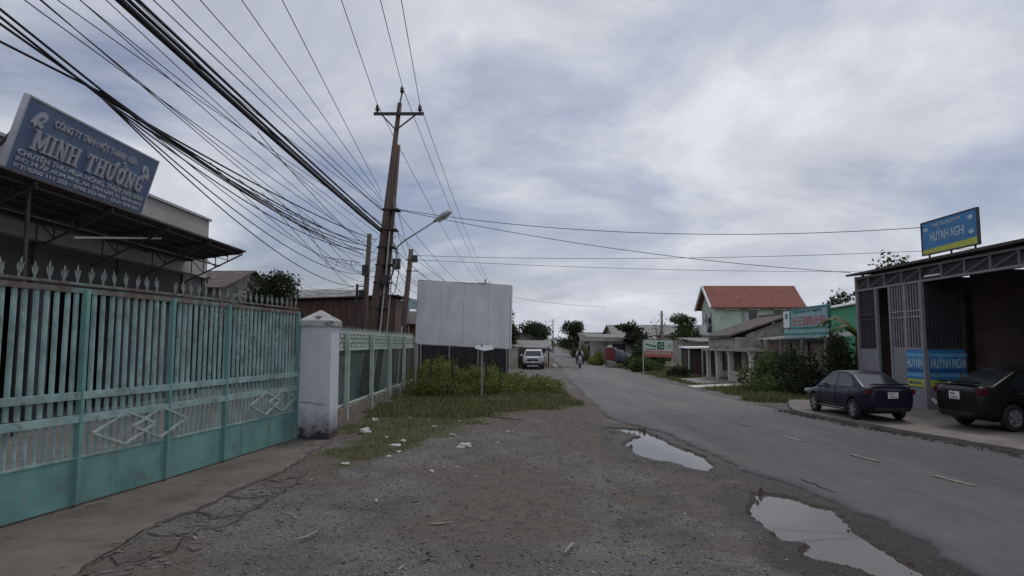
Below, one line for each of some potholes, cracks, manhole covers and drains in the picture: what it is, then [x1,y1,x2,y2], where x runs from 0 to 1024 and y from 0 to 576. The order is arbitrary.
pothole [594,426,727,475]
pothole [730,486,949,576]
crack [79,447,322,571]
